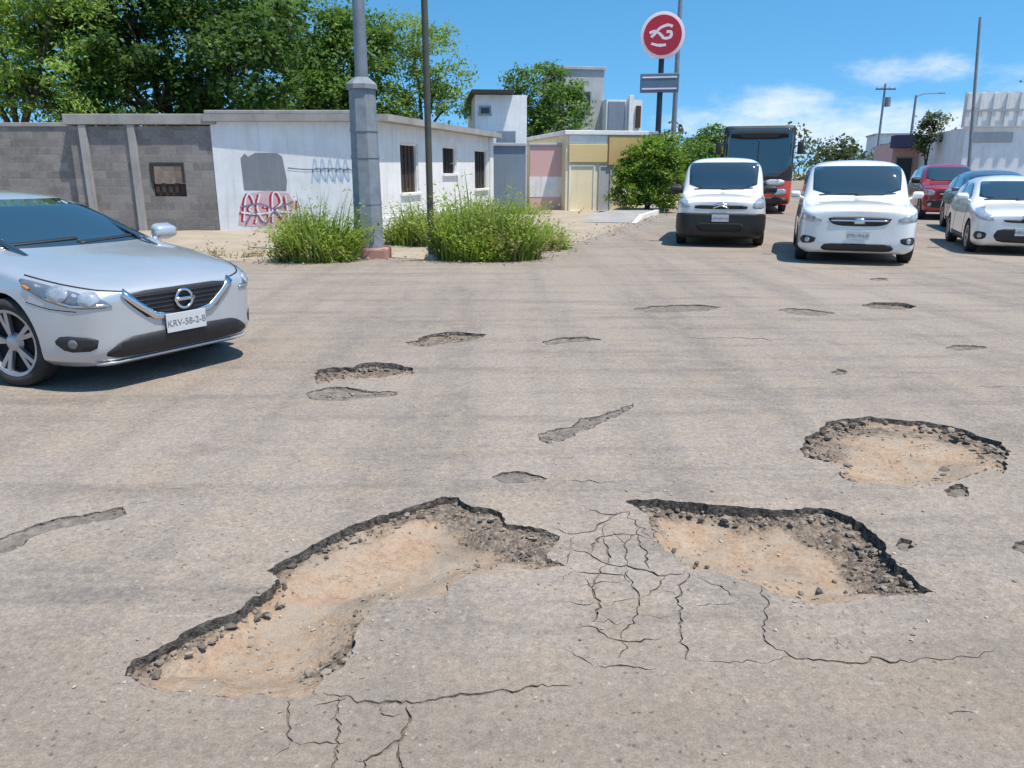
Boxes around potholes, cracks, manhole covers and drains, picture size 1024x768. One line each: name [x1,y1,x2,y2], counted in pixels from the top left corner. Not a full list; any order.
pothole [862,302,916,310]
pothole [634,304,720,313]
pothole [306,387,397,401]
pothole [405,332,486,346]
pothole [779,308,834,316]
pothole [124,497,564,698]
pothole [626,499,934,604]
pothole [800,416,1011,486]
pothole [314,362,414,384]
crack [555,505,994,670]
pothole [541,337,601,346]
crack [276,684,569,768]
